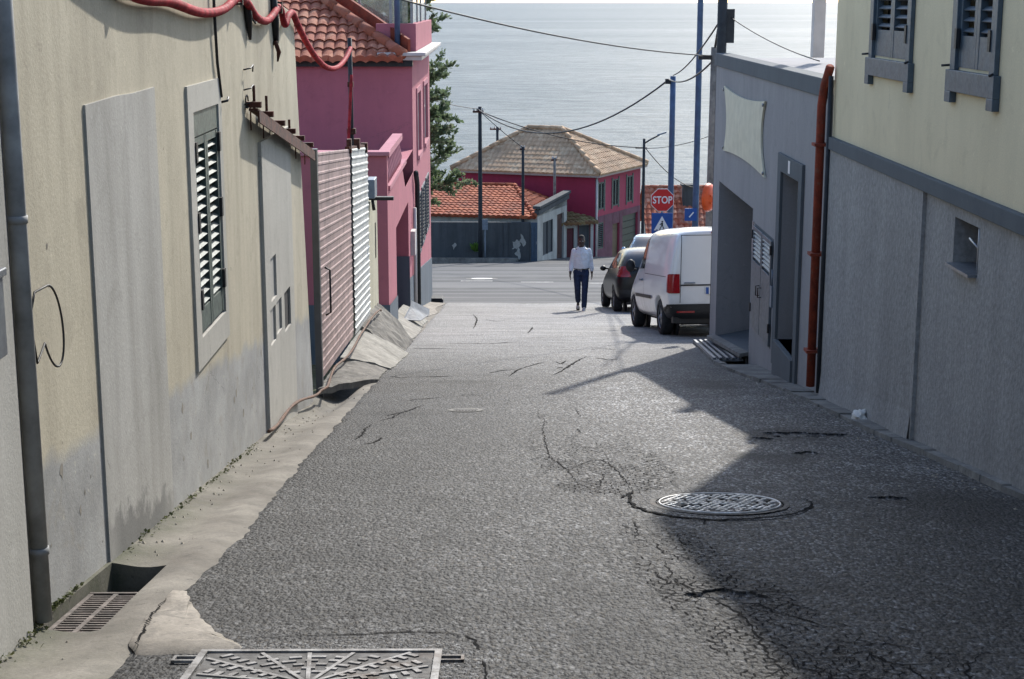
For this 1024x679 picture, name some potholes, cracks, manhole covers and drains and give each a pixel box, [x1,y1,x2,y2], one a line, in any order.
crack [358,394,478,444]
manhole cover [171,637,483,679]
crack [392,348,614,378]
crack [529,409,1001,679]
drain grate [49,592,138,632]
crack [427,314,533,349]
manhole cover [631,489,809,520]
